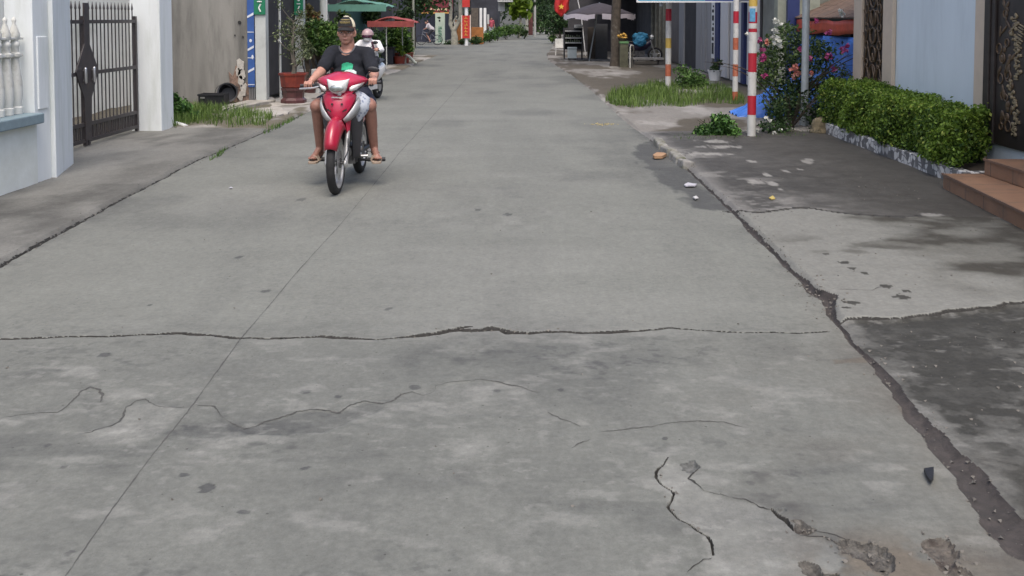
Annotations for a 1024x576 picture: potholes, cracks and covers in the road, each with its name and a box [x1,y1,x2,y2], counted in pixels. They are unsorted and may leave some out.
pothole [798,560,840,576]
pothole [921,537,973,576]
crack [0,139,1024,571]
pothole [834,539,896,576]
